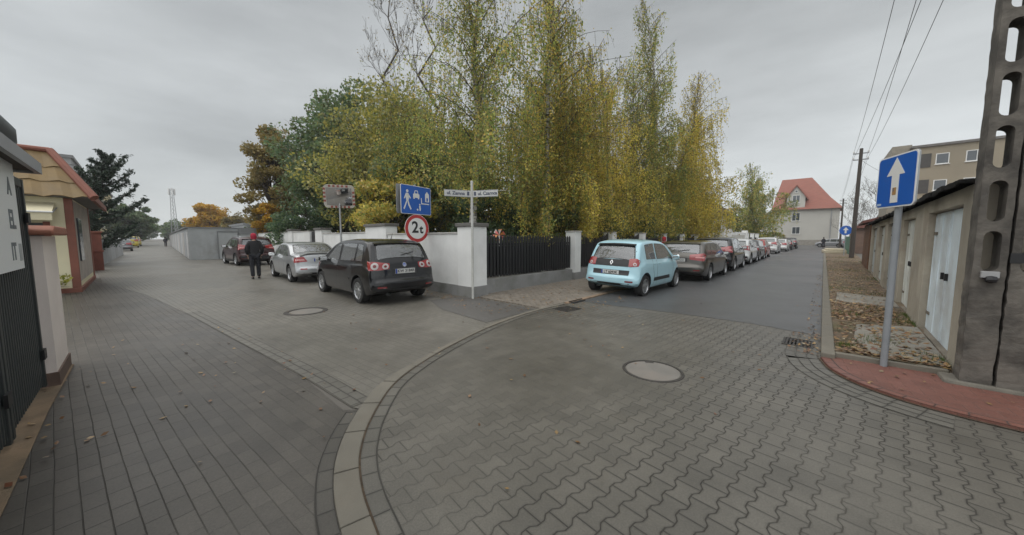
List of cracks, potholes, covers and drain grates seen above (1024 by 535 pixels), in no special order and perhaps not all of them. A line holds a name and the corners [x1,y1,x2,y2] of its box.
drain grate [781,337,814,349]
manhole cover [622,360,685,383]
manhole cover [283,307,328,316]
